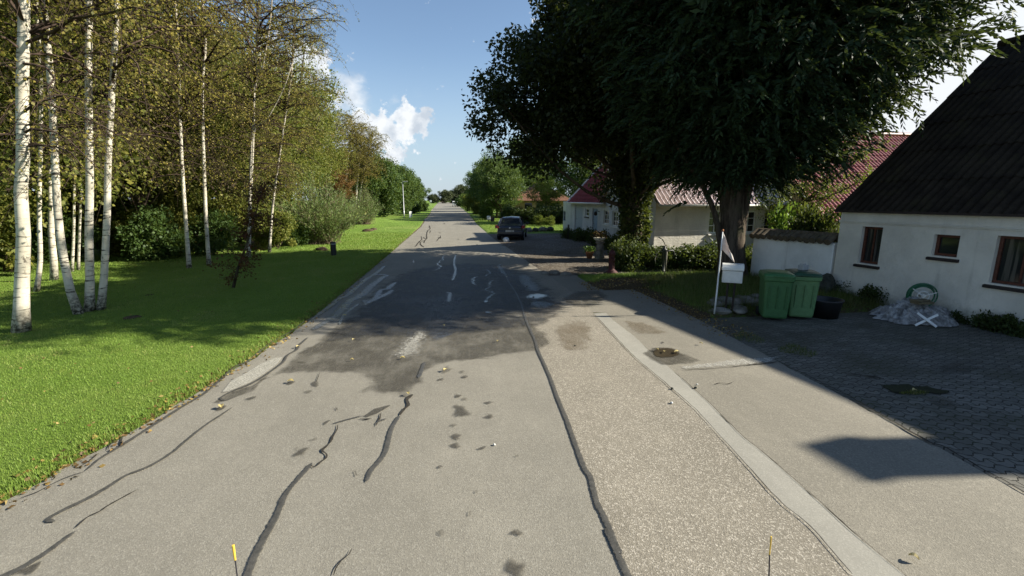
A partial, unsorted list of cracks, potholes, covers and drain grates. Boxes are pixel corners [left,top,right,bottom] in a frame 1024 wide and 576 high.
crack [408,226,444,270]
crack [21,436,136,528]
crack [311,425,338,467]
crack [399,394,413,415]
